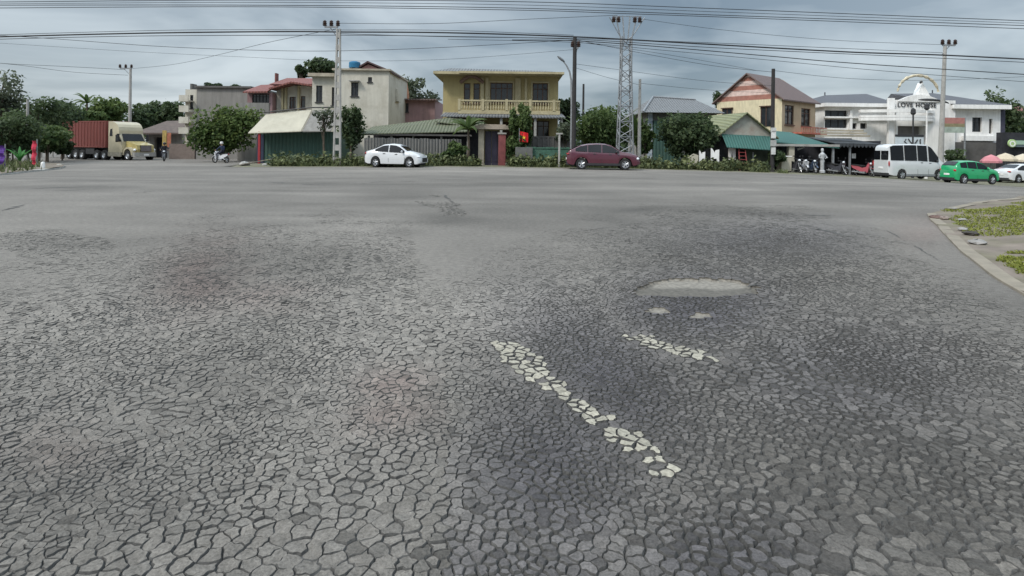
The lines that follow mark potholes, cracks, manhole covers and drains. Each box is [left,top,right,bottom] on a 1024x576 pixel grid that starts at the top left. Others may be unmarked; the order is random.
crack [0,186,1024,576]
